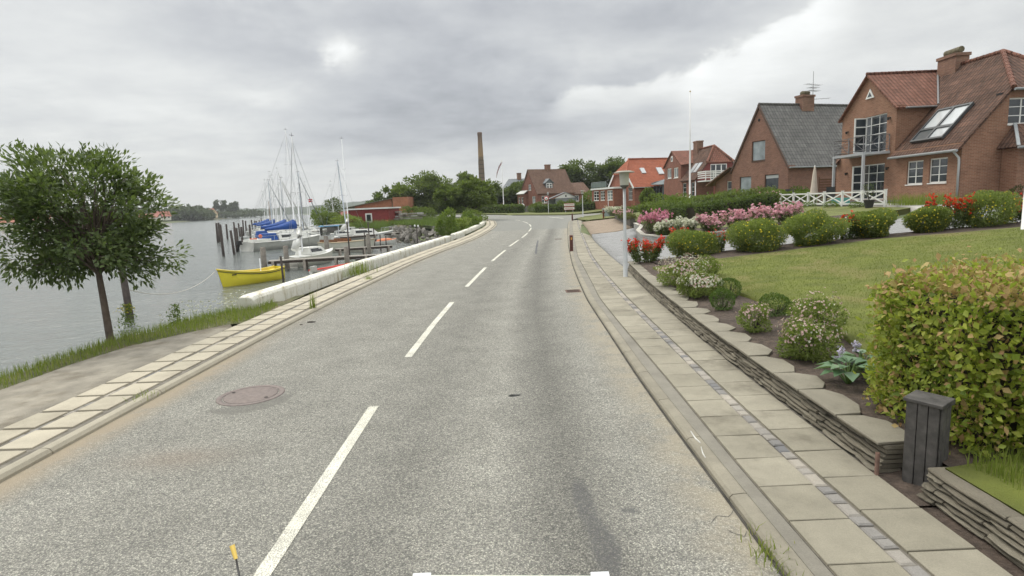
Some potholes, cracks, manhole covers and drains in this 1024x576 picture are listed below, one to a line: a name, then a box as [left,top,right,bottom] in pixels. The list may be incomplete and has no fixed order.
manhole cover [216,385,285,406]
